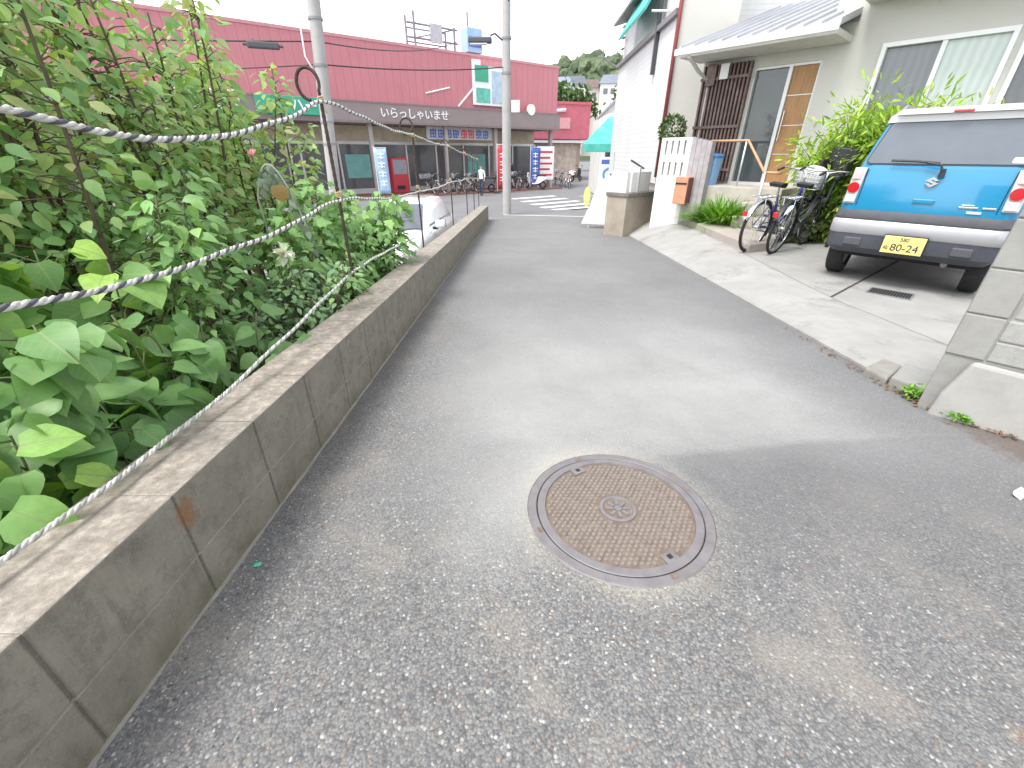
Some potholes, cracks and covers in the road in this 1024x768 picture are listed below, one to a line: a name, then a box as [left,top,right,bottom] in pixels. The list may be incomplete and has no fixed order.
drain grate [865,287,915,301]
manhole cover [527,454,717,588]
